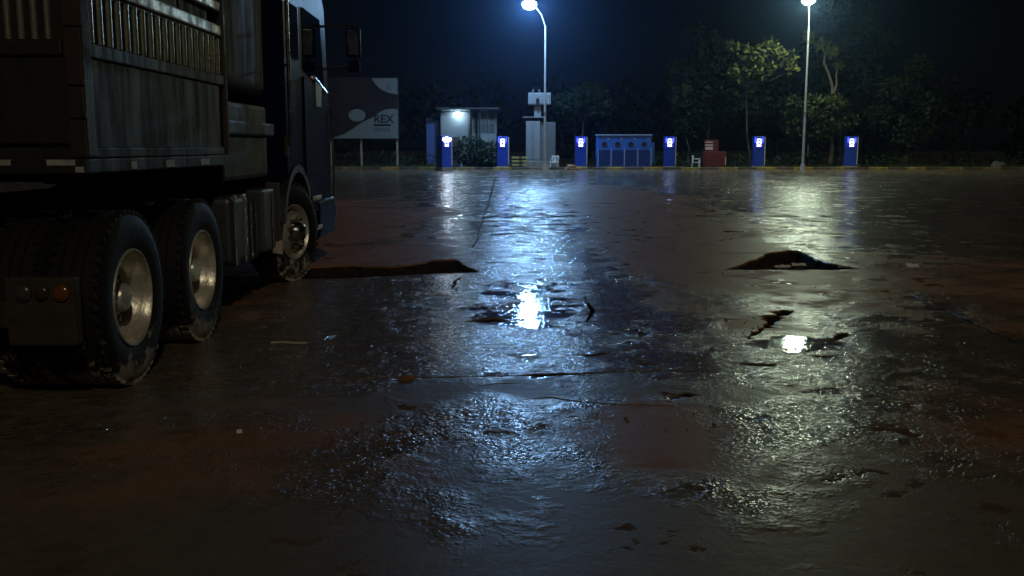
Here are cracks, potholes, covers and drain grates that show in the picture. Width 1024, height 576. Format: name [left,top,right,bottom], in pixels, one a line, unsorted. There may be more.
pothole [726,250,859,270]
crack [472,177,496,248]
crack [897,288,1024,346]
pothole [301,259,480,279]
crack [165,352,778,406]
crack [722,310,850,346]
